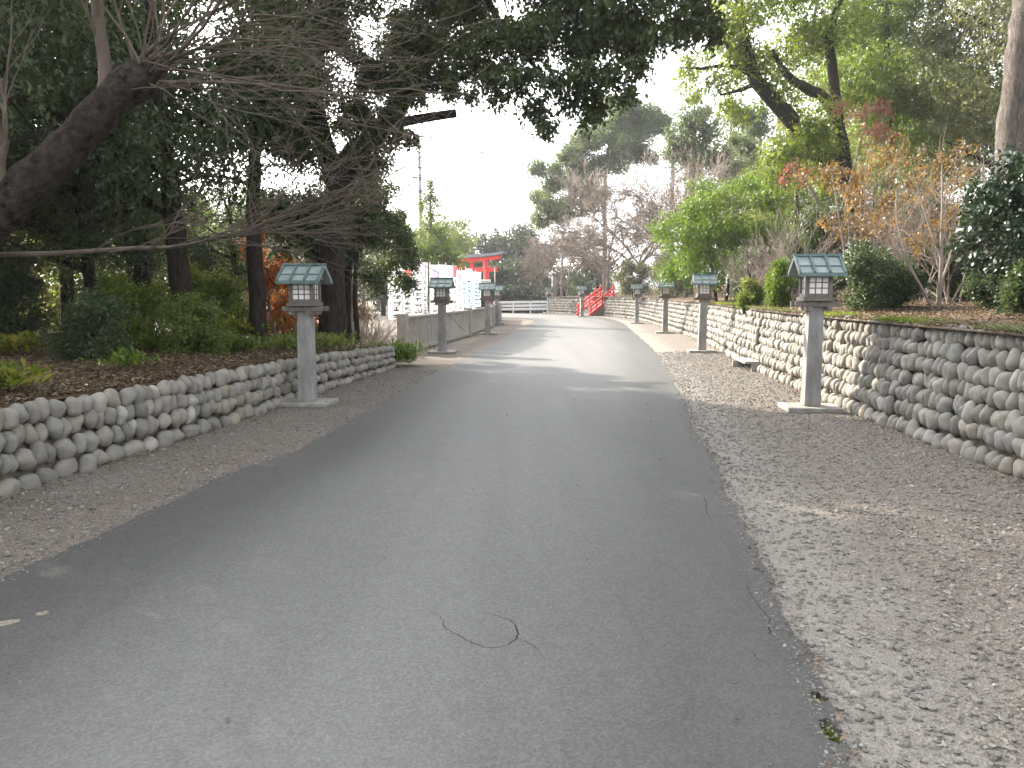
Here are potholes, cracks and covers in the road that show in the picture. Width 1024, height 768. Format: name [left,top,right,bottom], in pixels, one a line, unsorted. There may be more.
crack [411,604,542,656]
crack [746,585,778,665]
